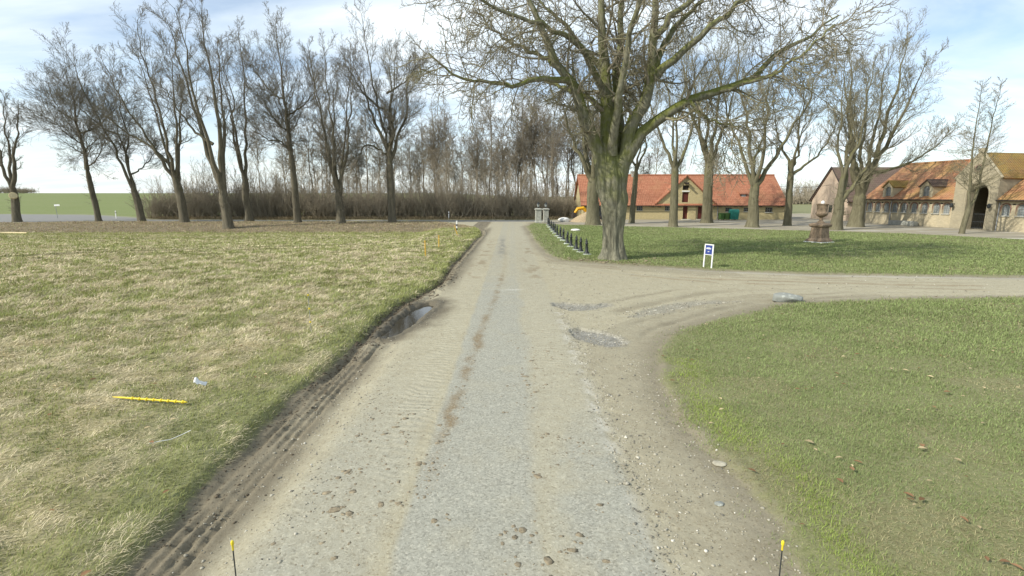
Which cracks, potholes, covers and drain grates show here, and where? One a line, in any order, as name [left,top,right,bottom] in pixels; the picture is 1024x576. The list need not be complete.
pothole [375,302,437,338]
pothole [553,302,611,311]
pothole [569,328,627,347]
